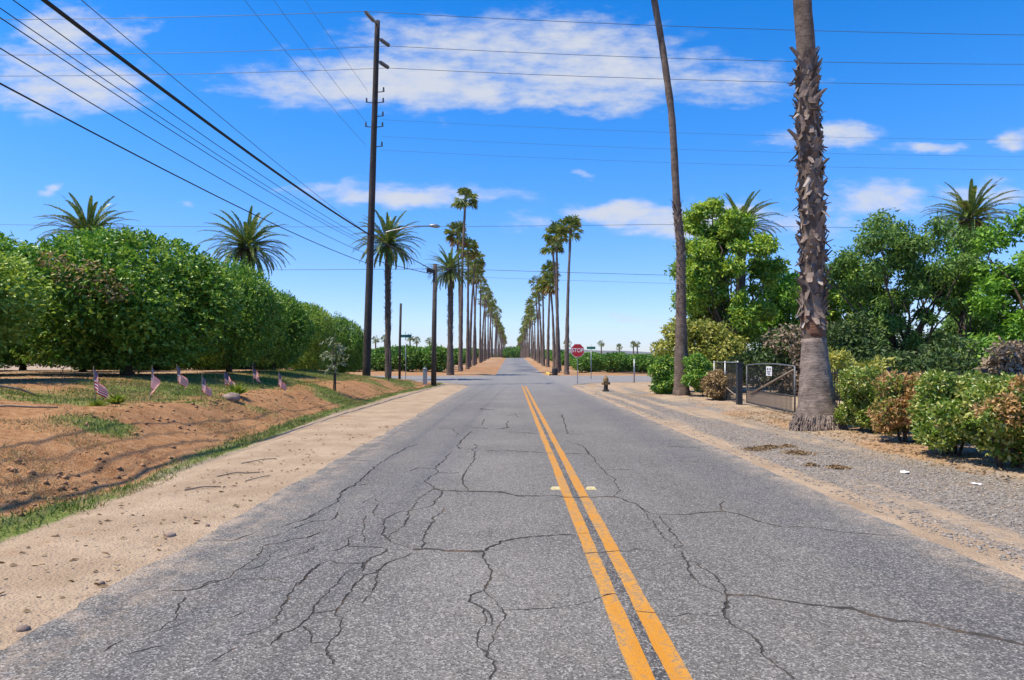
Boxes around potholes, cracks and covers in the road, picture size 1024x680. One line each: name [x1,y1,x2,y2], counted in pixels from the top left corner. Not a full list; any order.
crack [103,408,1024,680]
